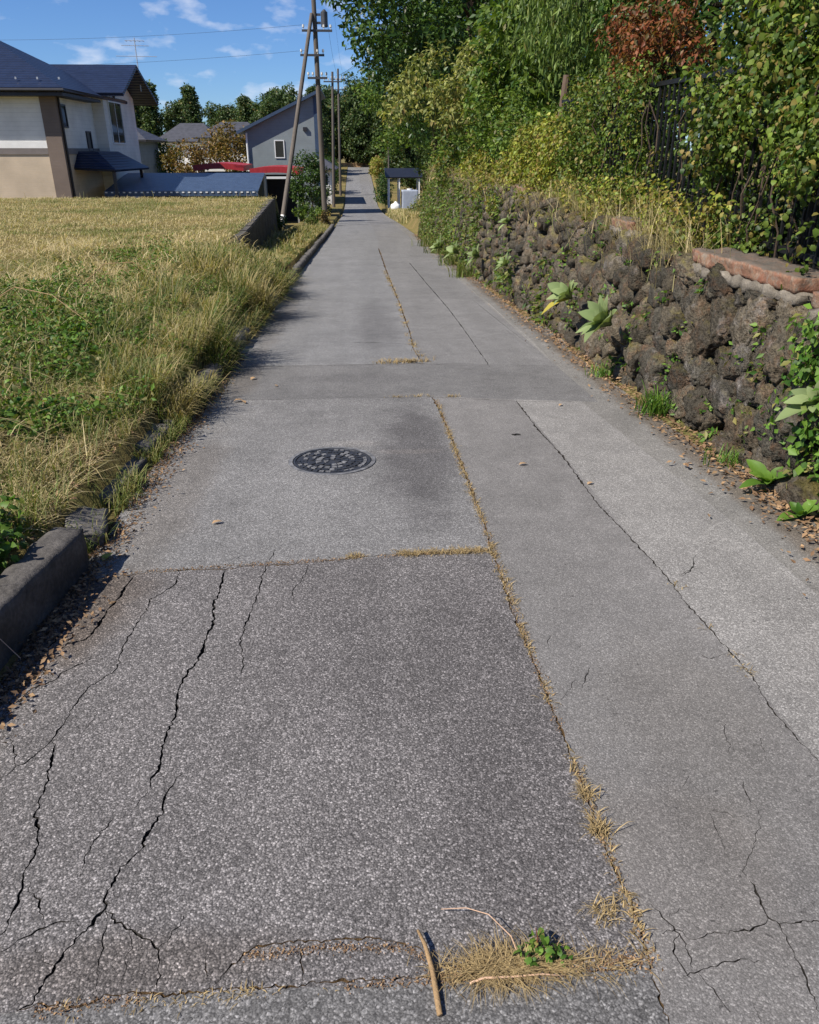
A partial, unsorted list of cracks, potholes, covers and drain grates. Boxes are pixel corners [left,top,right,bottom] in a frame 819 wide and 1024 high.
manhole cover [288,447,376,475]
crack [656,781,819,1012]
crack [0,572,225,1011]
